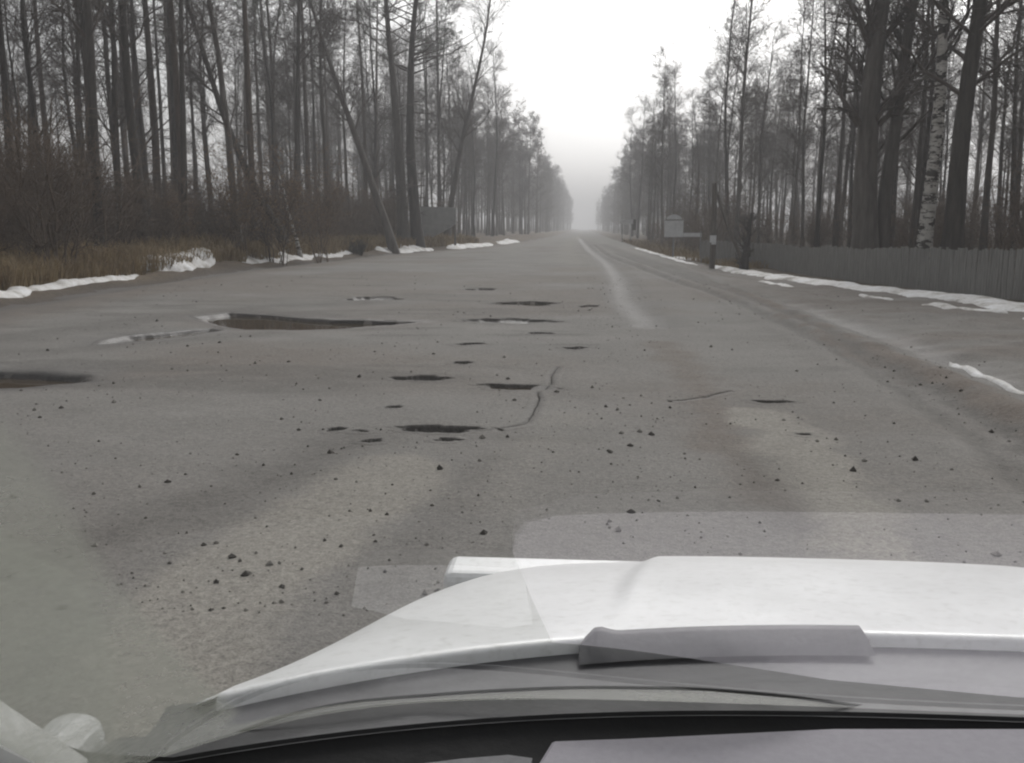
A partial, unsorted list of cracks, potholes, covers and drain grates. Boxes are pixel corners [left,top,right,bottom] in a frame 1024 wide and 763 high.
pothole [384,423,500,436]
pothole [0,369,104,390]
crack [495,367,567,431]
pothole [467,383,573,392]
pothole [379,374,464,383]
crack [669,390,739,403]
pothole [190,312,424,331]
pothole [451,317,572,325]
